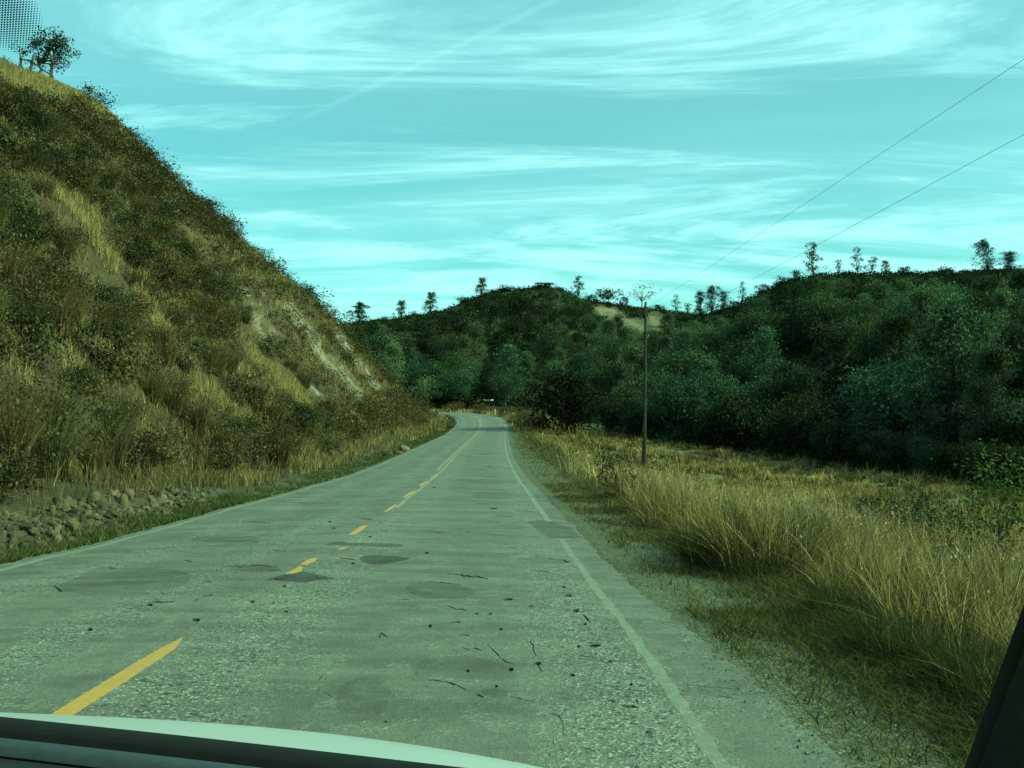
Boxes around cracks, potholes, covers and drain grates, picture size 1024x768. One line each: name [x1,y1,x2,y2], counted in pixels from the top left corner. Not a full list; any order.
crack [399,574,511,600]
crack [510,696,596,752]
crack [428,679,484,698]
crack [438,606,543,672]
